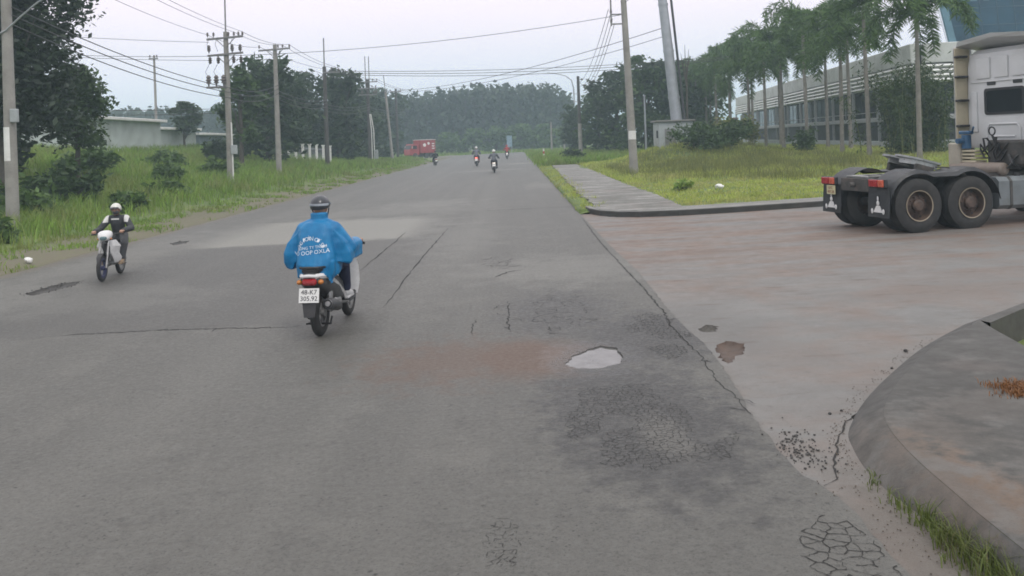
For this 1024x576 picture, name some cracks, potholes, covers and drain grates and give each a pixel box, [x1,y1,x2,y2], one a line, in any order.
pothole [20,281,82,296]
crack [826,416,853,485]
crack [584,221,755,413]
crack [799,515,901,576]
pothole [715,341,745,363]
crack [565,383,739,470]
pothole [565,345,624,369]
